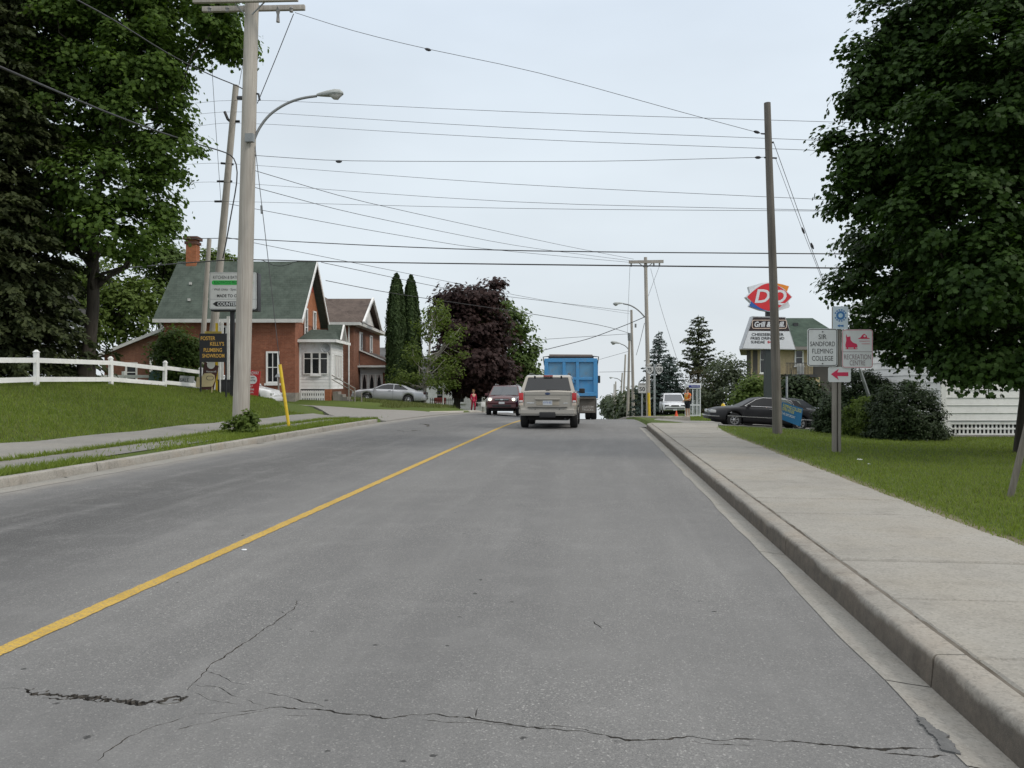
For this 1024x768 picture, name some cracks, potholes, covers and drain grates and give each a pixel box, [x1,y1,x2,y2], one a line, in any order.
crack [24,602,943,764]
